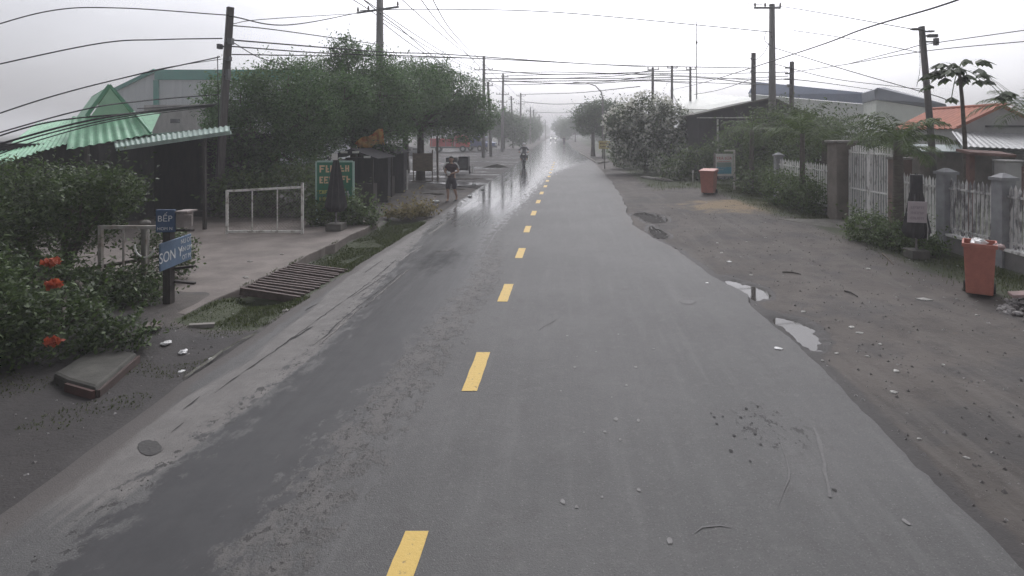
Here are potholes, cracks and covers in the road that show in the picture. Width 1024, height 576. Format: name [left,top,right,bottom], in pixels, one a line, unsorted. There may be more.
pothole [648,226,670,239]
pothole [632,212,669,224]
drain grate [239,262,348,302]
